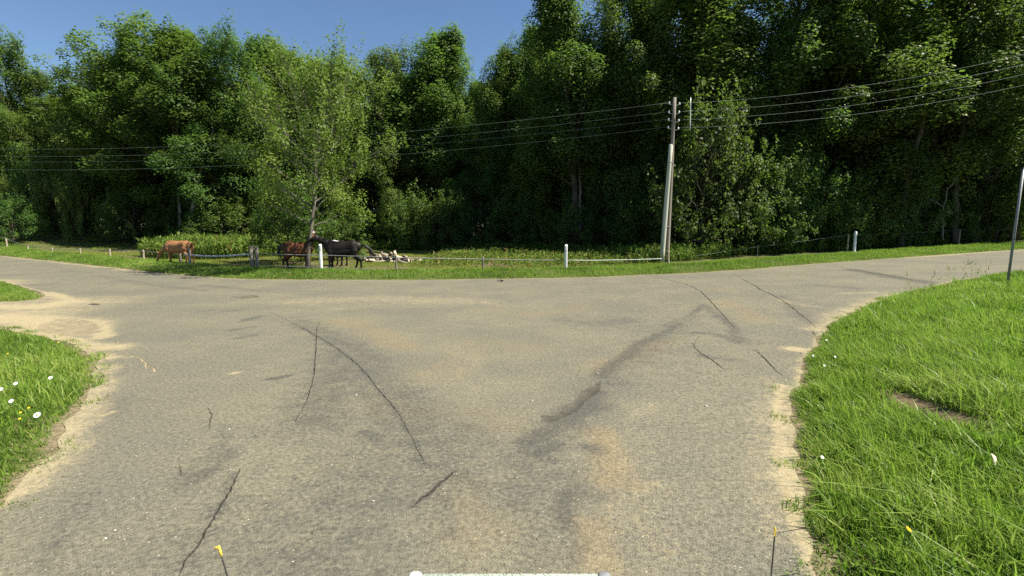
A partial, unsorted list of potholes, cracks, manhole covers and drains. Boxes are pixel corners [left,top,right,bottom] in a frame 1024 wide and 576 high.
crack [178,466,240,574]
crack [275,314,456,506]
crack [736,275,816,336]
